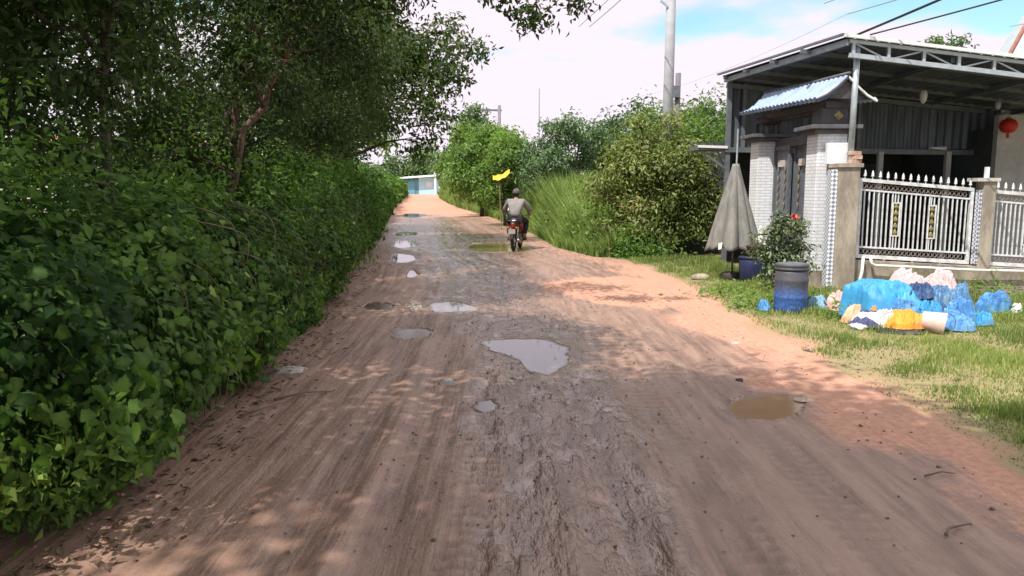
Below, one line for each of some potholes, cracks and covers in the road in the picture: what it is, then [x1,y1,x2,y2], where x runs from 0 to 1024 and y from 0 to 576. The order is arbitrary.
pothole [359,302,397,311]
pothole [471,398,500,413]
pothole [388,327,437,340]
pothole [718,392,814,422]
pothole [475,336,578,378]
pothole [438,378,461,387]
pothole [426,300,483,313]
pothole [389,240,421,249]
pothole [389,253,420,263]
pothole [461,242,536,253]
